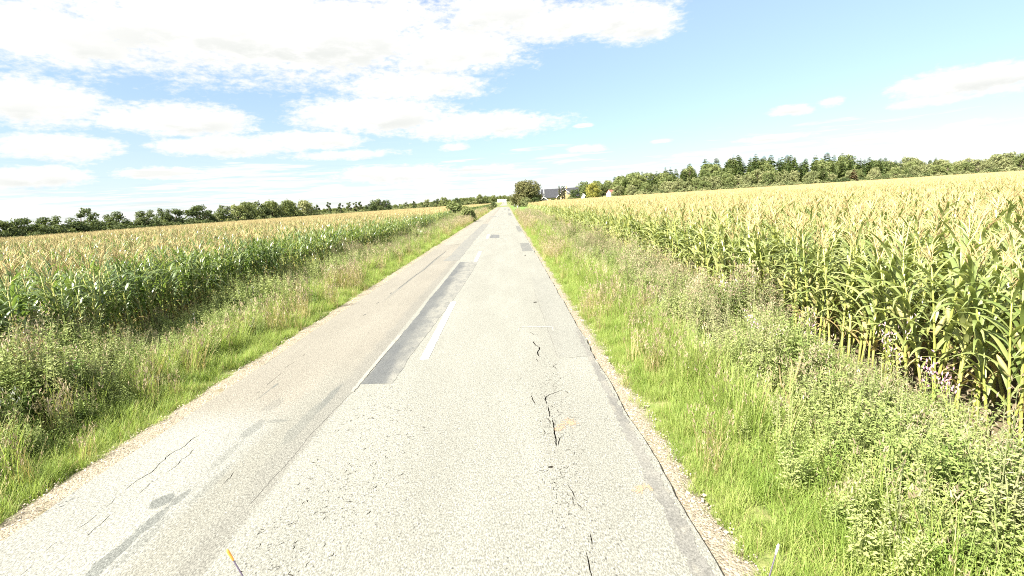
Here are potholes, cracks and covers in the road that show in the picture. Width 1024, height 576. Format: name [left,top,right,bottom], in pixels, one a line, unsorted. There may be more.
crack [21,436,197,575]
crack [523,332,591,522]
